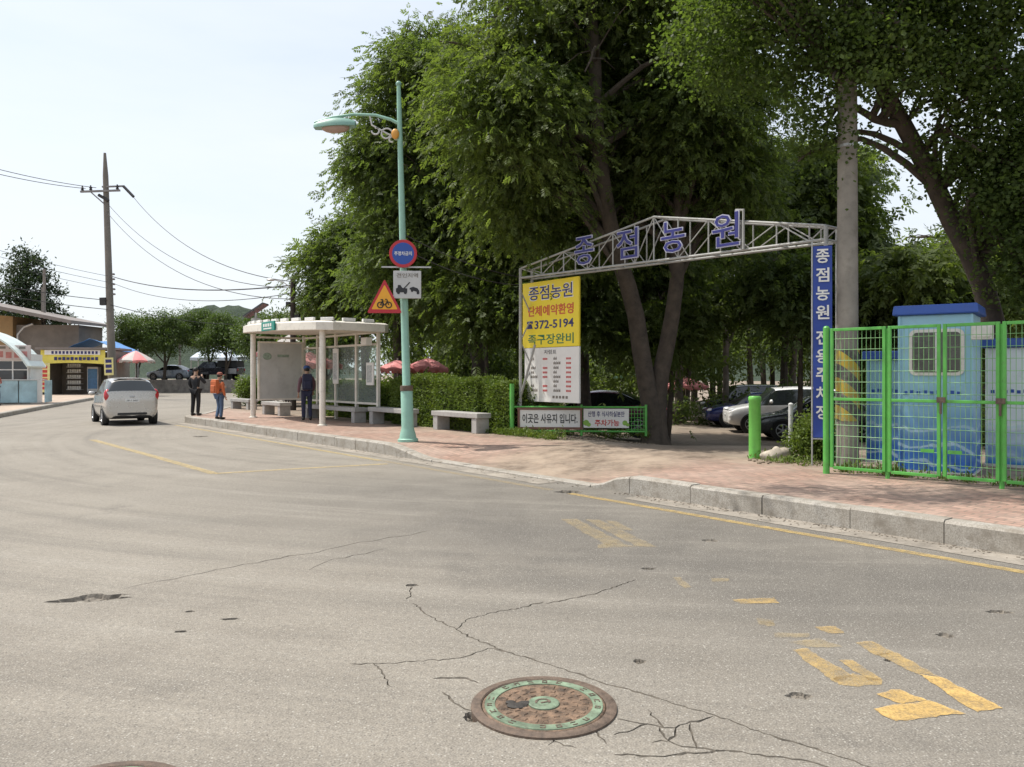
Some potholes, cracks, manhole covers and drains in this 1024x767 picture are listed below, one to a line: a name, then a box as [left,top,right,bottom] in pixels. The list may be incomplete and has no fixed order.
crack [124,531,425,589]
crack [353,580,870,767]
pothole [43,594,133,603]
manhole cover [471,676,617,742]
pothole [785,692,813,700]
